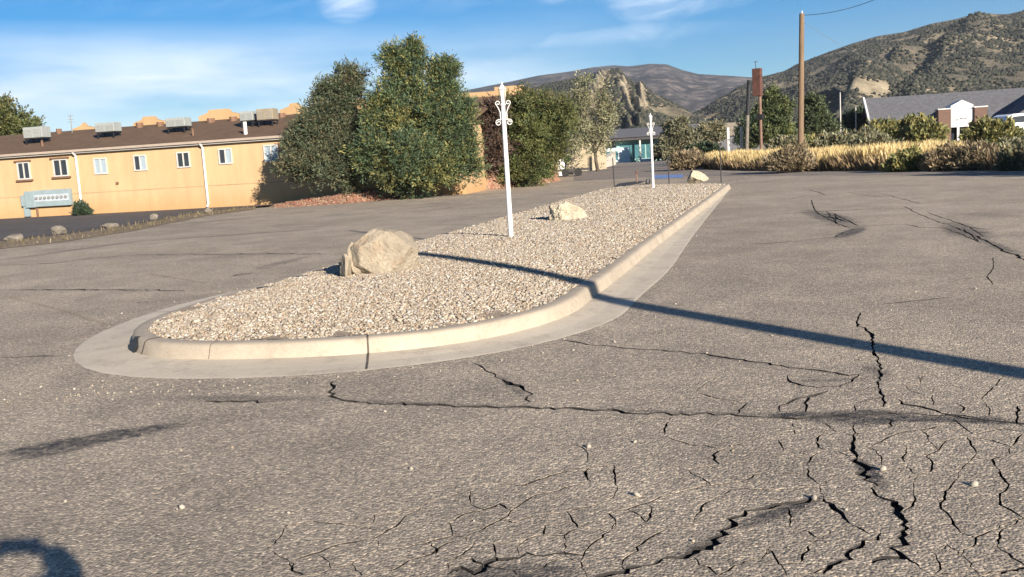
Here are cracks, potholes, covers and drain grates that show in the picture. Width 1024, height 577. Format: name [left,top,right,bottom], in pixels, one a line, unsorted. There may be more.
crack [742,190,1024,284]
crack [267,313,1024,577]
